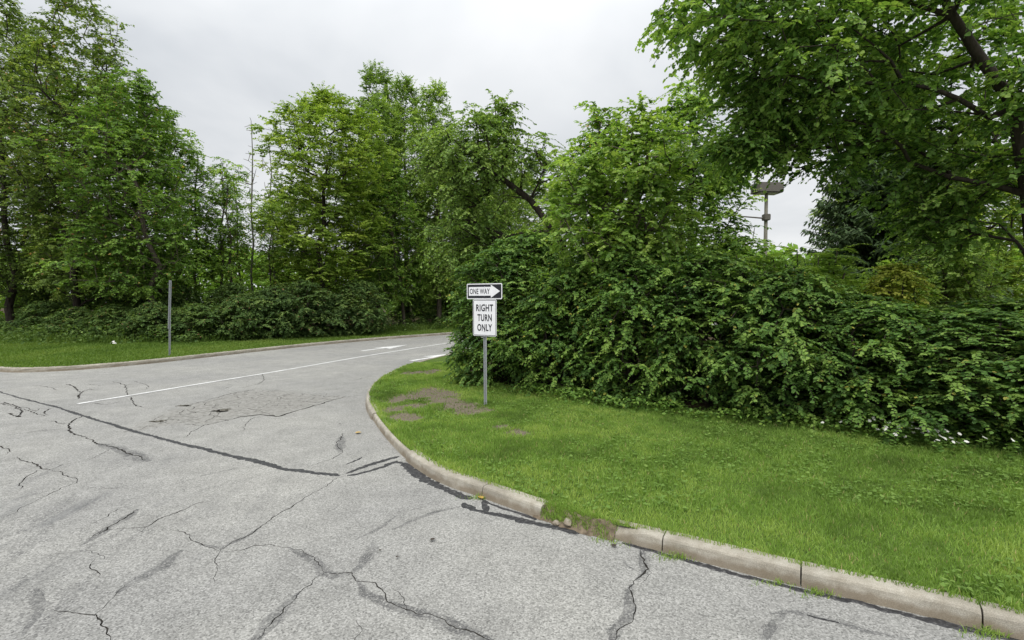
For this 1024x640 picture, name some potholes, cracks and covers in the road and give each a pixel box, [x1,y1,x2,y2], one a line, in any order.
crack [0,382,149,515]
crack [54,478,489,640]
crack [616,543,1019,640]
